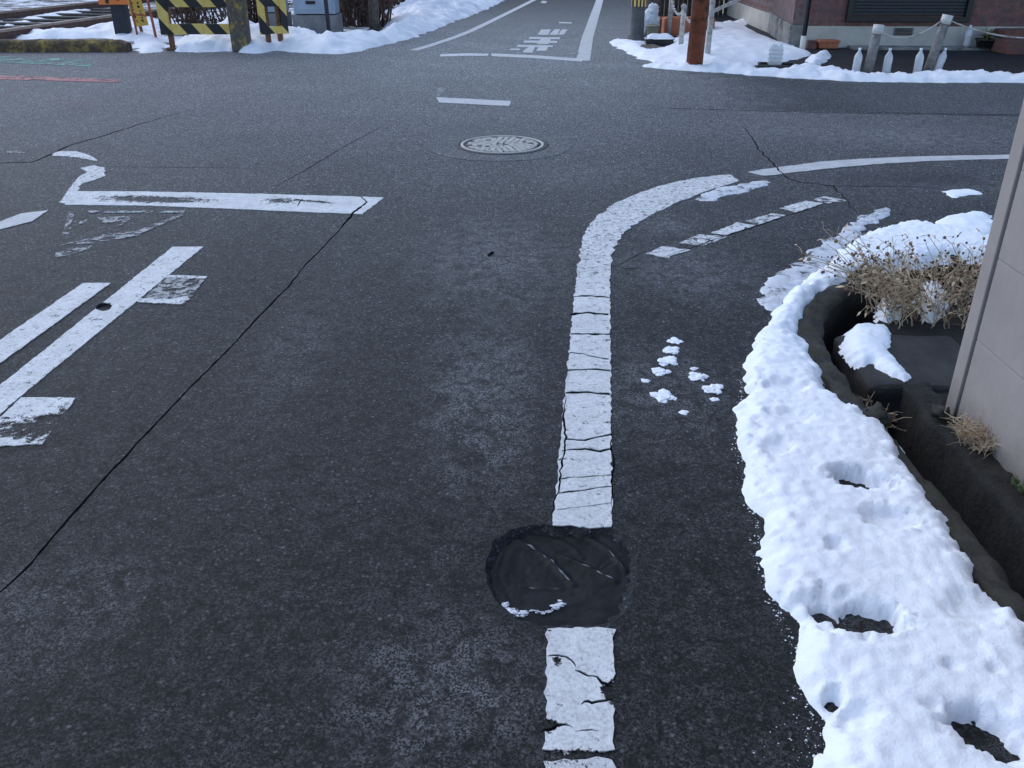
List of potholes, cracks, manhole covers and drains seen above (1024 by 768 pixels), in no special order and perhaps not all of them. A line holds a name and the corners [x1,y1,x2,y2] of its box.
crack [0,127,380,593]
crack [552,655,613,705]
pothole [485,524,638,628]
manhole cover [456,135,549,155]
crack [653,126,932,262]
crack [552,392,615,519]
